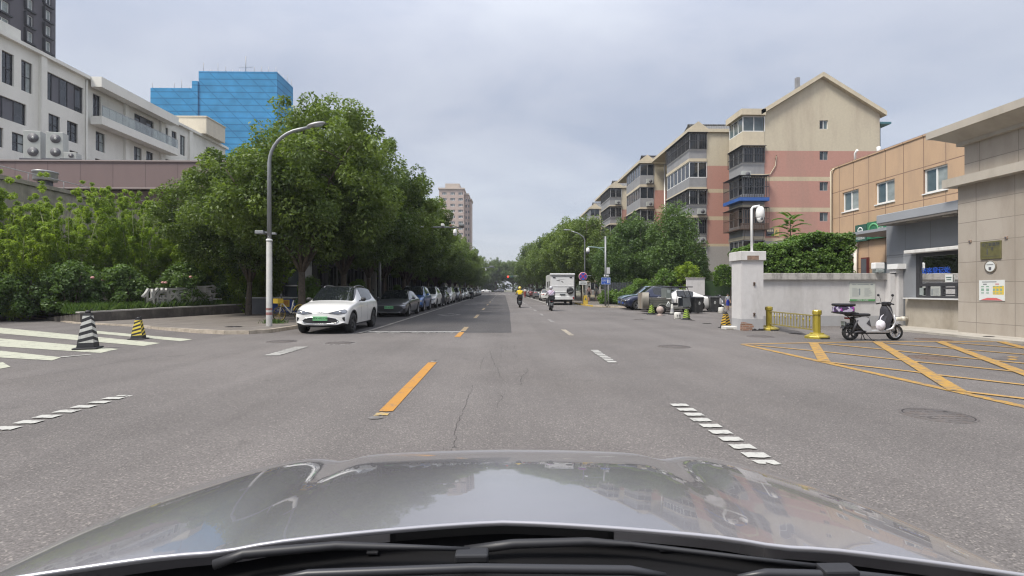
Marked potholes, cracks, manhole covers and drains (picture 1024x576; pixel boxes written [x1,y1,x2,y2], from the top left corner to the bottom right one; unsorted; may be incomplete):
manhole cover [899,408,980,424]
